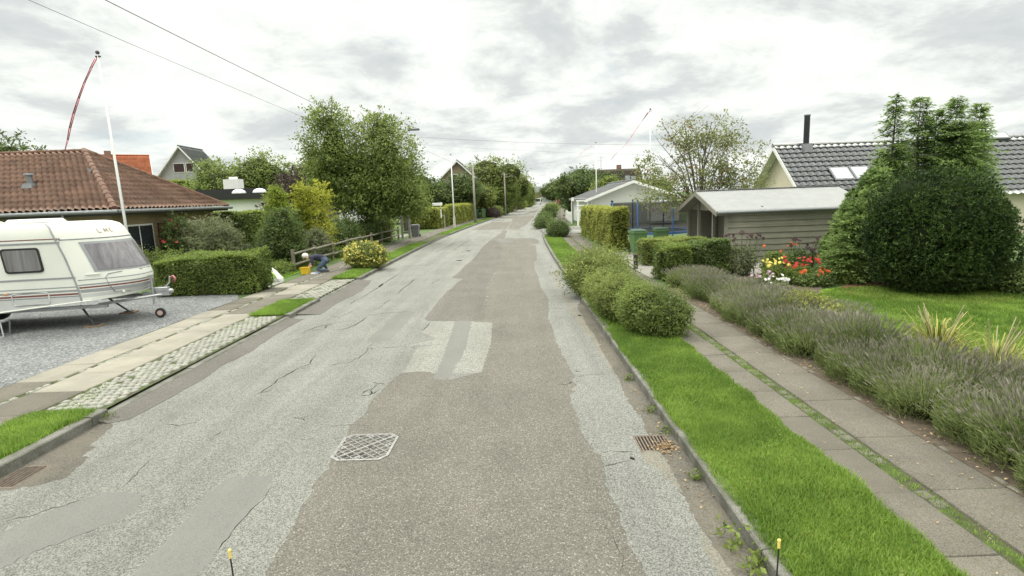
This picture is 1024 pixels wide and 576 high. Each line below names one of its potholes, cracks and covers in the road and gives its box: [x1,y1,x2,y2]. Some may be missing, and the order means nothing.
crack [255,242,466,395]
drain grate [633,435,675,452]
drain grate [0,465,53,488]
